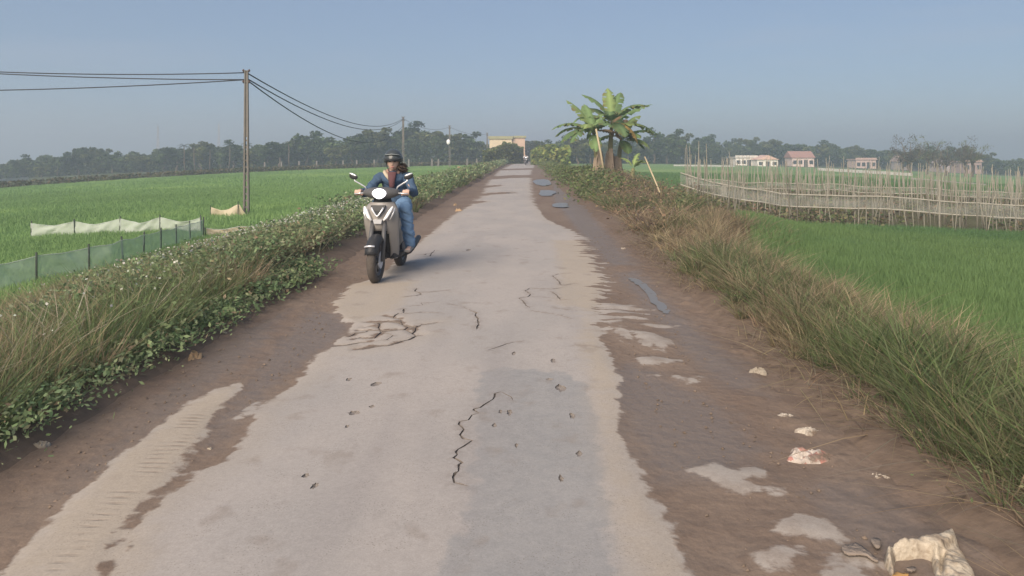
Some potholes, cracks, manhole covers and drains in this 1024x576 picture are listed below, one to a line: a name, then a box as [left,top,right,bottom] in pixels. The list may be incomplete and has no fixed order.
crack [452,392,513,486]
crack [339,289,479,350]
crack [519,273,575,318]
